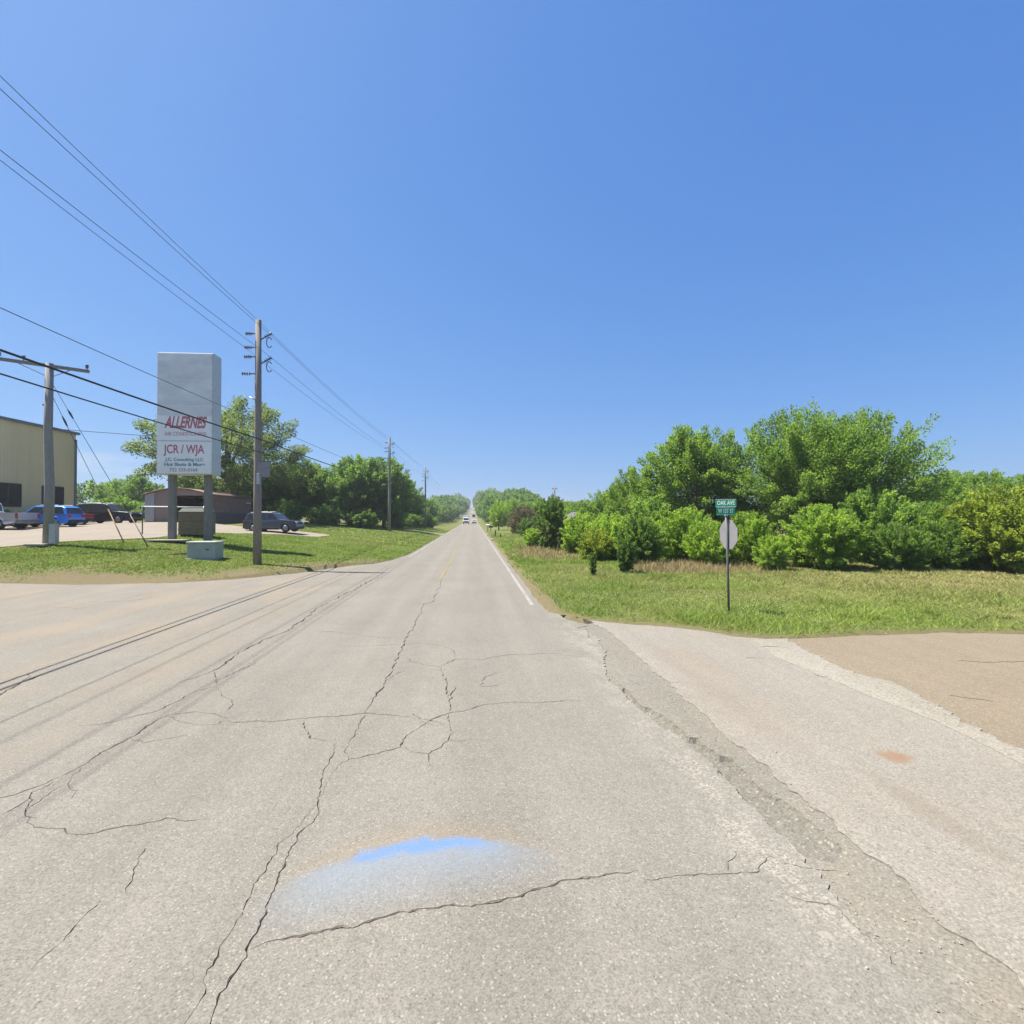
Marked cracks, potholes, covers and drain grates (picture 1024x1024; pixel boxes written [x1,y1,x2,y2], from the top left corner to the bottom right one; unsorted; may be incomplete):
crack [2,568,834,1024]
